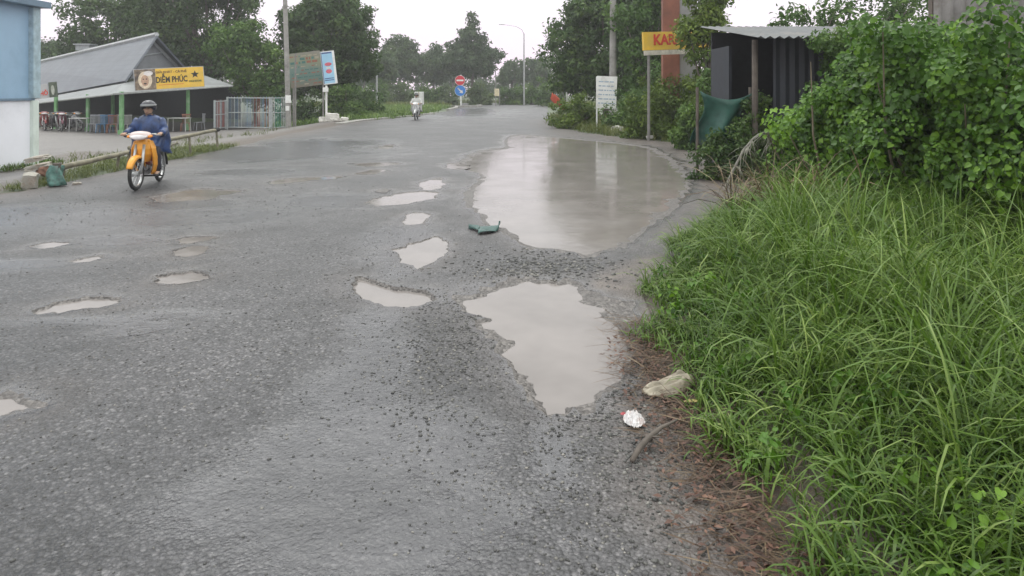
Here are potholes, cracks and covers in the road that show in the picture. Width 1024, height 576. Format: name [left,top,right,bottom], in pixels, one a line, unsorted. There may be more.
pothole [365,191,439,207]
pothole [31,295,123,314]
pothole [351,276,437,307]
pothole [153,270,211,284]
pothole [401,212,432,225]
pothole [176,236,219,244]
pothole [171,245,211,257]
pothole [458,134,694,258]
pothole [149,188,243,203]
pothole [451,276,641,417]
pothole [391,236,449,269]
pothole [419,177,446,191]
